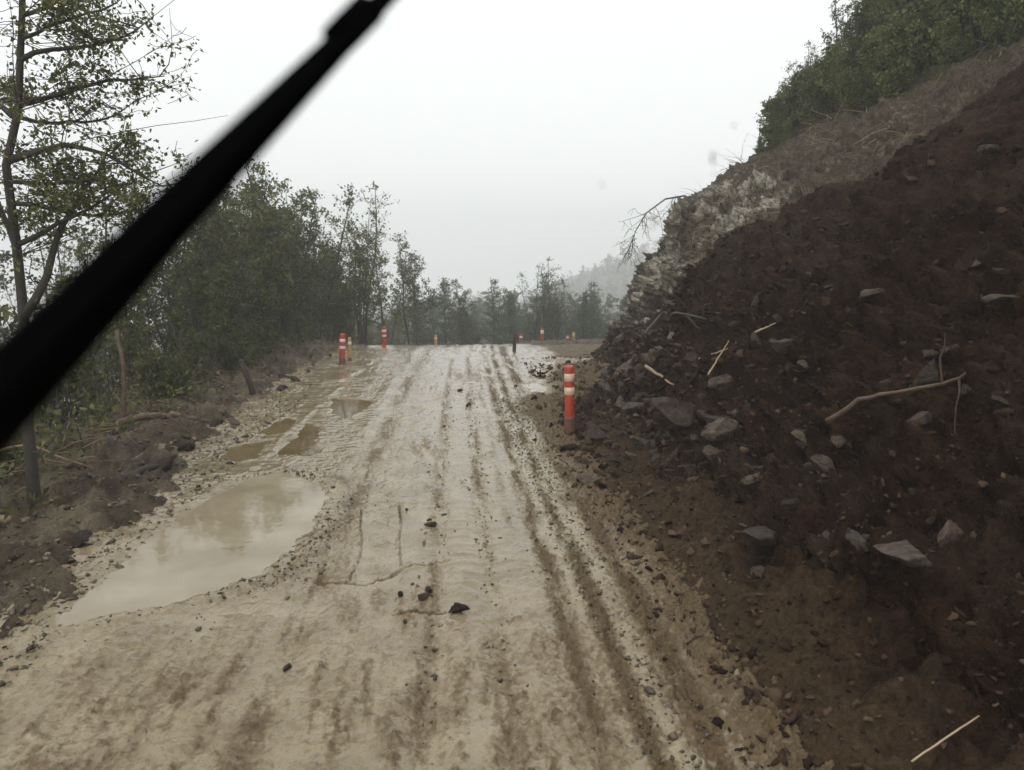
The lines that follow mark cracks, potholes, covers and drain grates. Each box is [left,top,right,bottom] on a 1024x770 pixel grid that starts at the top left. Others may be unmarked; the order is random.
pothole [216,437,280,462]
pothole [251,416,302,436]
pothole [272,421,324,456]
pothole [20,468,342,630]
pothole [326,396,380,420]
crack [315,501,449,586]
